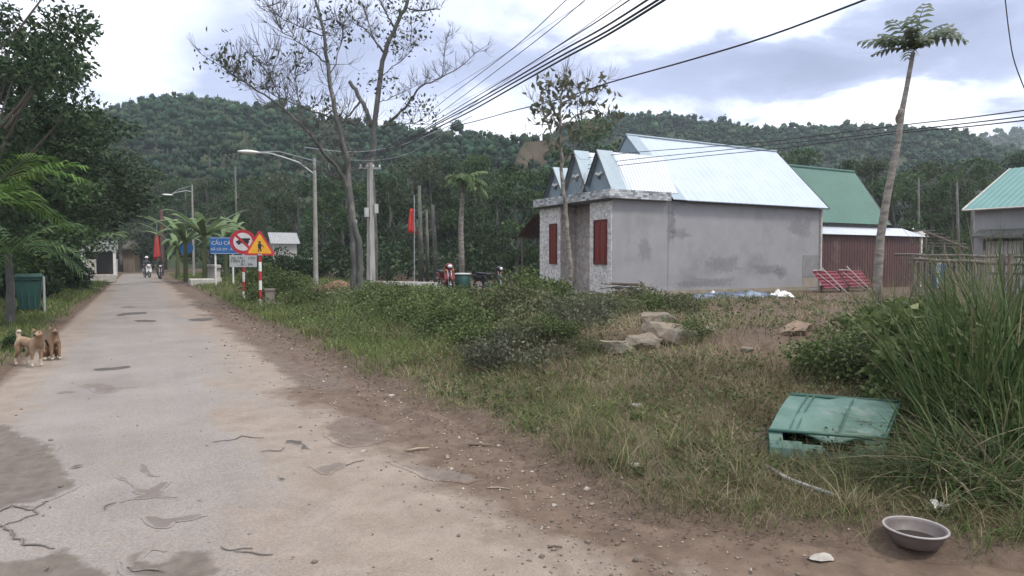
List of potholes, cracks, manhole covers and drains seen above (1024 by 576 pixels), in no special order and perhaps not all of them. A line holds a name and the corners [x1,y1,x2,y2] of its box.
pothole [307,462,350,475]
crack [212,435,283,452]
pothole [389,462,484,484]
crack [0,501,56,549]
pothole [140,513,207,528]
pothole [117,474,177,502]
pothole [283,439,311,452]
